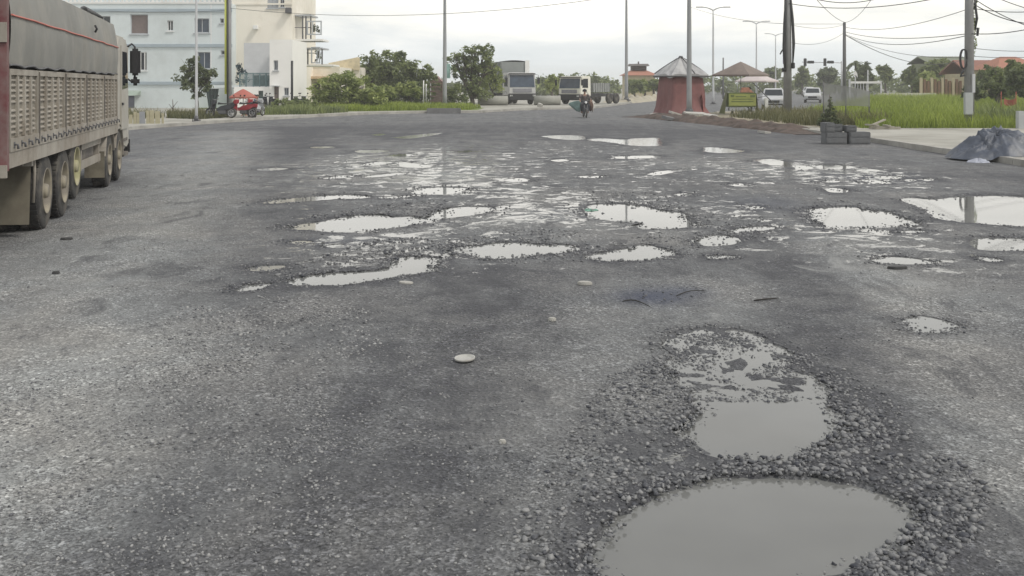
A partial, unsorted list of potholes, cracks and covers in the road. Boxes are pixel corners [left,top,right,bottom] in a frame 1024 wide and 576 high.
pothole [578,471,927,576]
pothole [690,234,741,246]
pothole [410,186,468,195]
pothole [659,327,858,463]
pothole [582,203,697,229]
pothole [802,205,923,229]
pothole [445,241,581,259]
pothole [285,205,495,232]
pothole [968,236,1024,251]
pothole [901,315,960,333]
pothole [582,243,676,261]
pothole [282,255,443,285]
